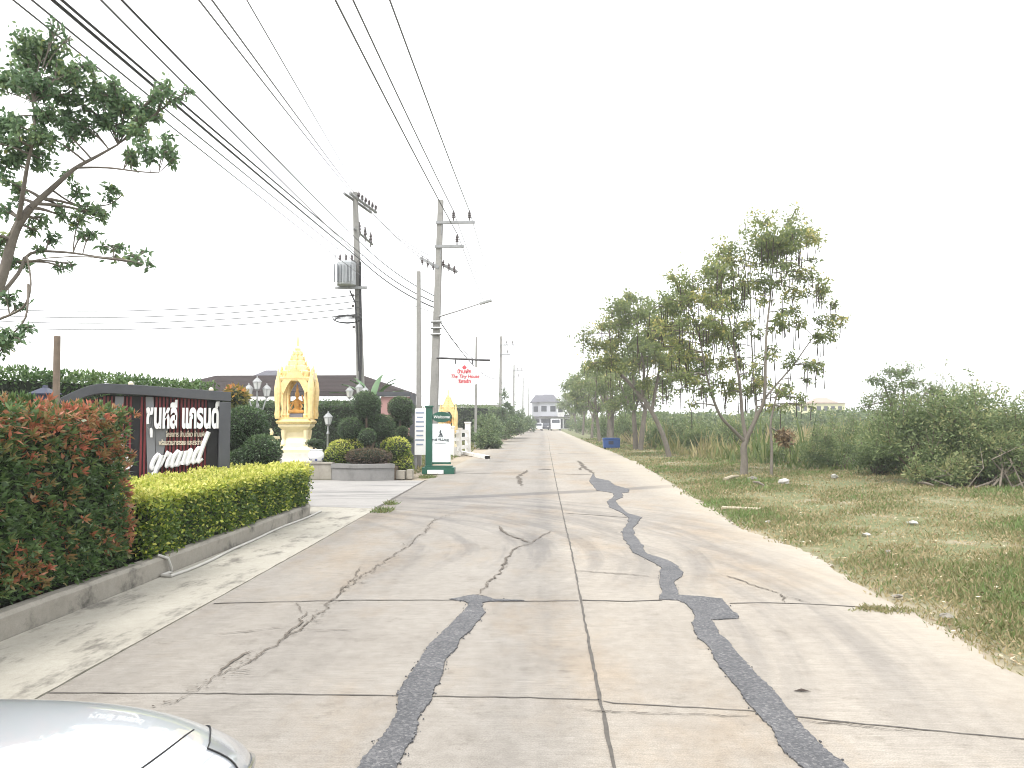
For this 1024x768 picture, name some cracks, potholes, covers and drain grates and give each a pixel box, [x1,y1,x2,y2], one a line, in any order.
crack [475,526,551,596]
crack [152,515,450,706]
